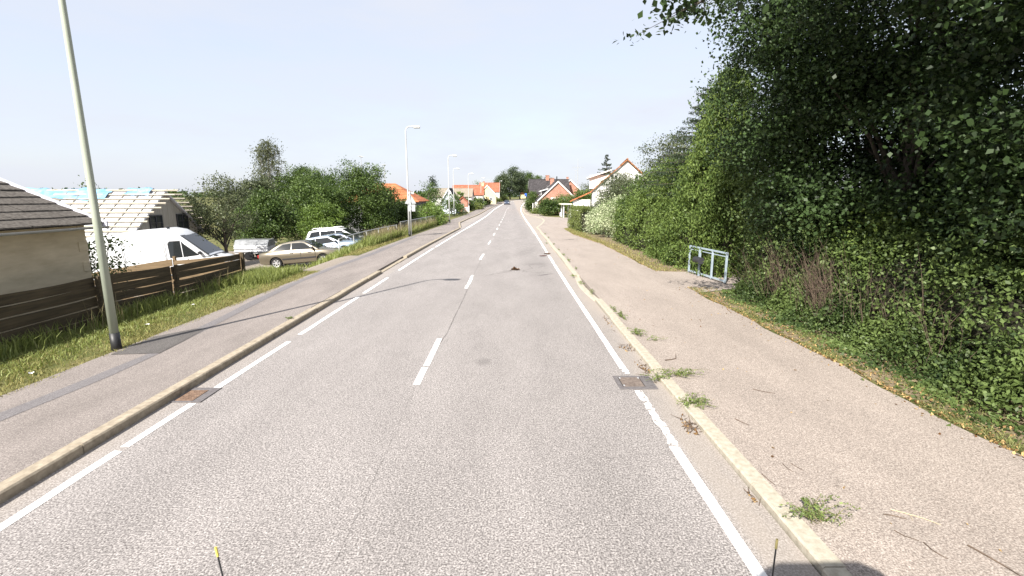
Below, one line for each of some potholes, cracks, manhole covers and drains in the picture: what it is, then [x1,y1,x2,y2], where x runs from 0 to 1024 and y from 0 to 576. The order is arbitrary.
manhole cover [170,388,221,403]
manhole cover [612,376,658,389]
